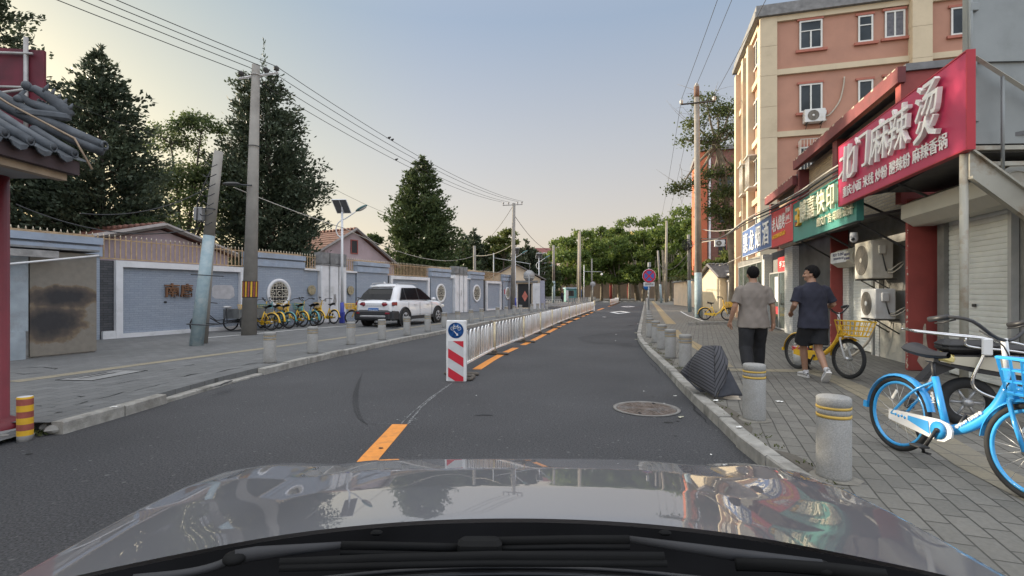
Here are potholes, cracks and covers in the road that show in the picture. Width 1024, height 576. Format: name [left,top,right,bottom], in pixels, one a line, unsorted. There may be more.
manhole cover [613,401,681,417]
